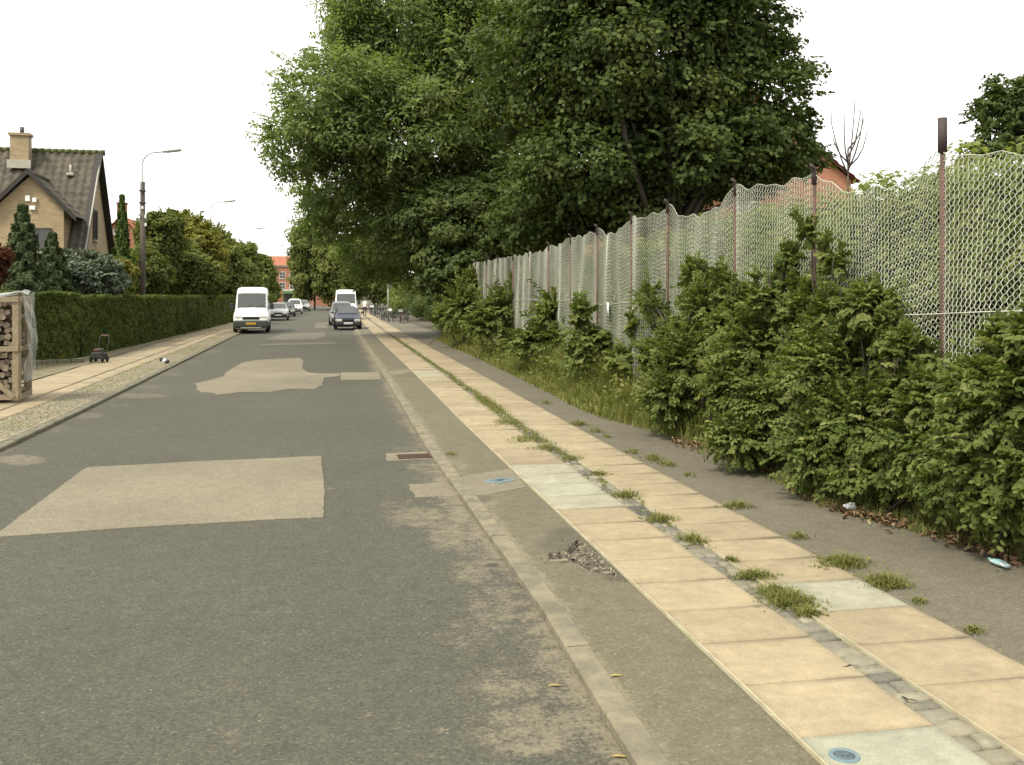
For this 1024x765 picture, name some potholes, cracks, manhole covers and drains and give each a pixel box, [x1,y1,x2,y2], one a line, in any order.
pothole [541,537,625,581]
utility cover [828,747,861,763]
